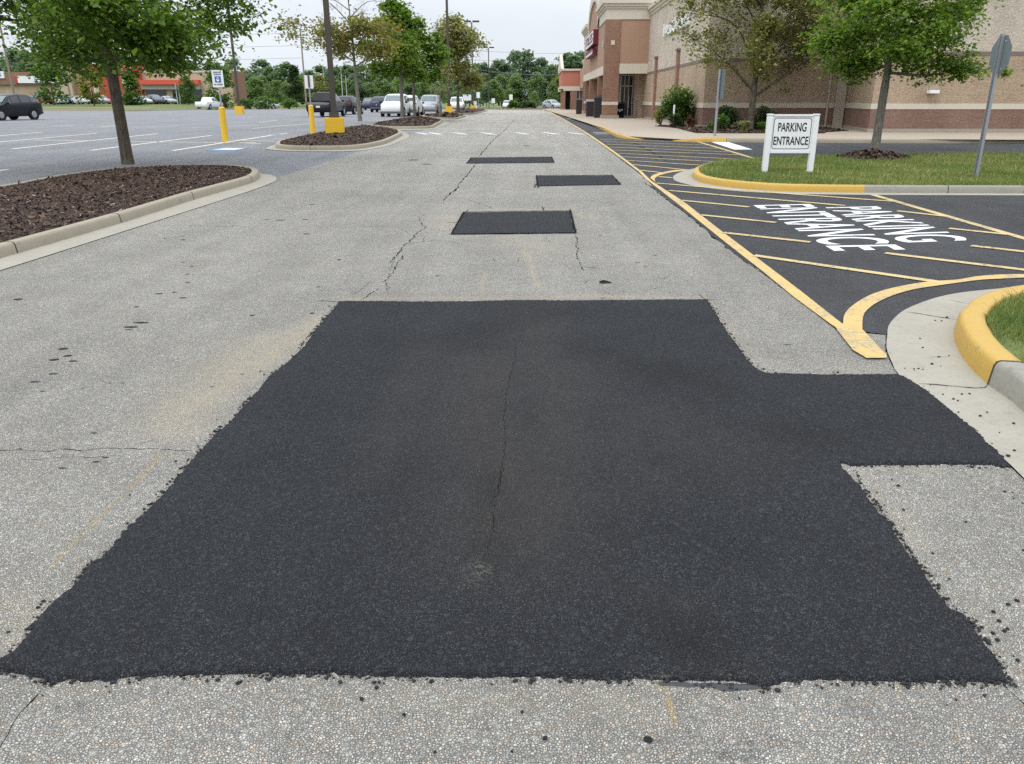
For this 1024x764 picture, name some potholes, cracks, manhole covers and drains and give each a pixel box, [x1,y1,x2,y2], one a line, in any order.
crack [163,214,459,300]
crack [0,688,43,747]
crack [487,340,523,554]
crack [493,206,613,296]
crack [0,438,189,460]
